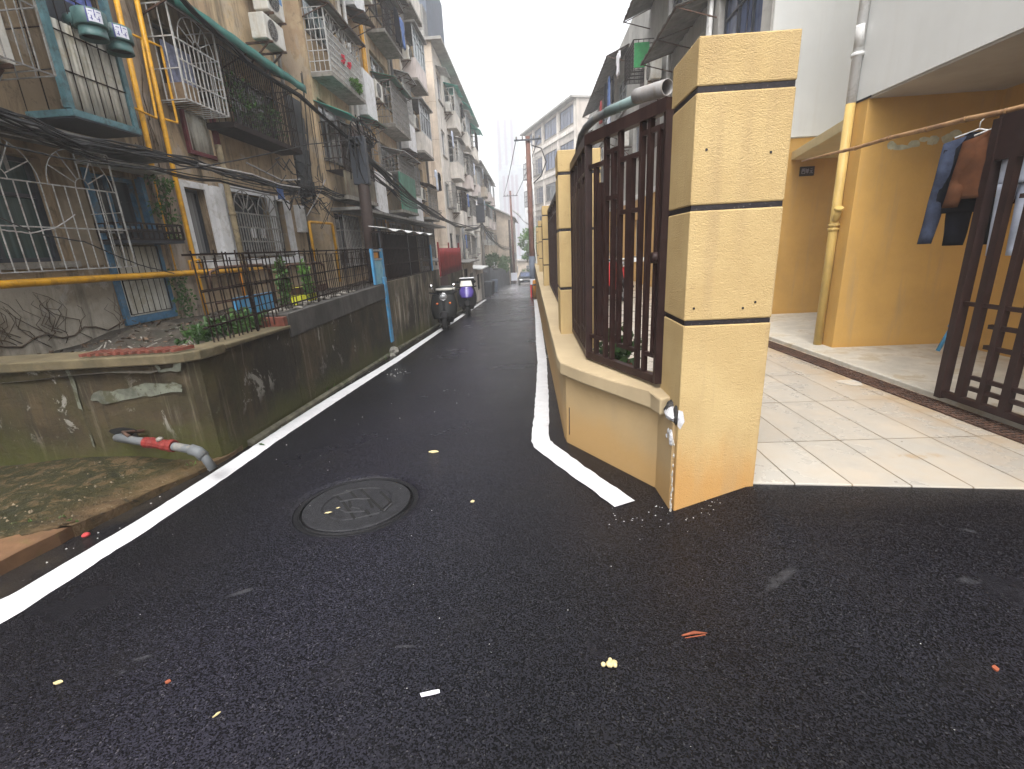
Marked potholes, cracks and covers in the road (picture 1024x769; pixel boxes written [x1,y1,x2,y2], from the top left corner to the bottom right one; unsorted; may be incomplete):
manhole cover [293,478,419,537]
